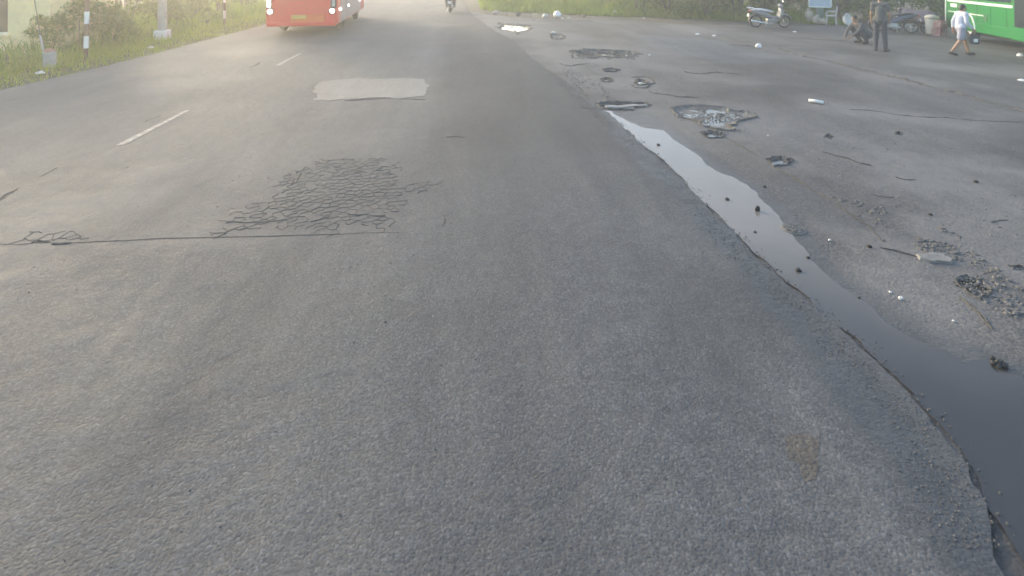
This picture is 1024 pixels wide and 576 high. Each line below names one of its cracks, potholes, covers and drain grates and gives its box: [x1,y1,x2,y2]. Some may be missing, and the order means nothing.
crack [209,158,442,239]
crack [5,231,86,245]
pothole [700,130,724,138]
pothole [766,155,794,166]
pothole [568,48,644,58]
pothole [495,22,532,35]
crack [632,76,698,98]
pothole [669,104,758,132]
pothole [955,274,992,299]
pothole [595,100,652,110]
